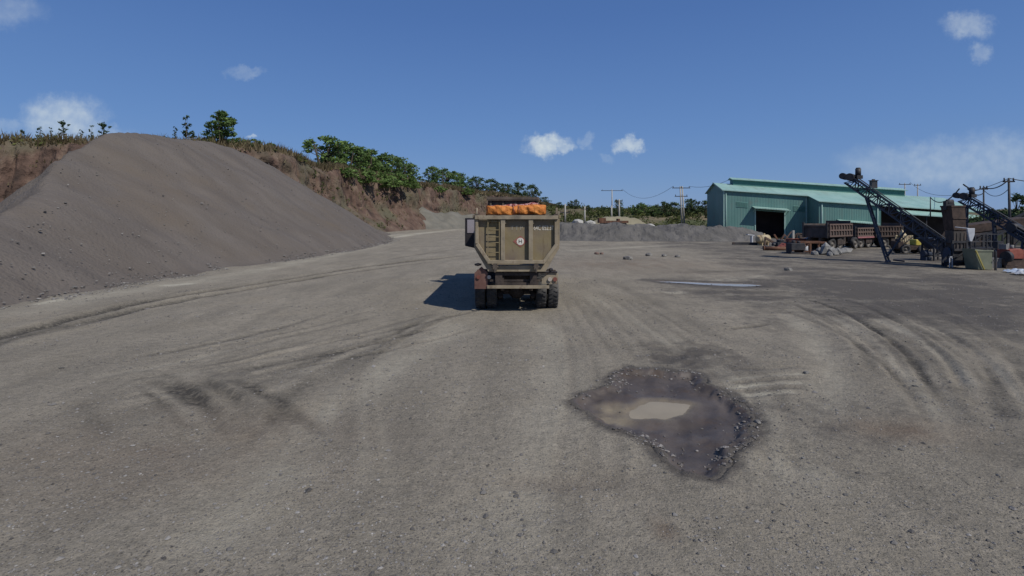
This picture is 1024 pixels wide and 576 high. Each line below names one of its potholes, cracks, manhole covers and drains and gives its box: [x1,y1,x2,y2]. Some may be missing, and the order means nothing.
pothole [568,365,762,481]
